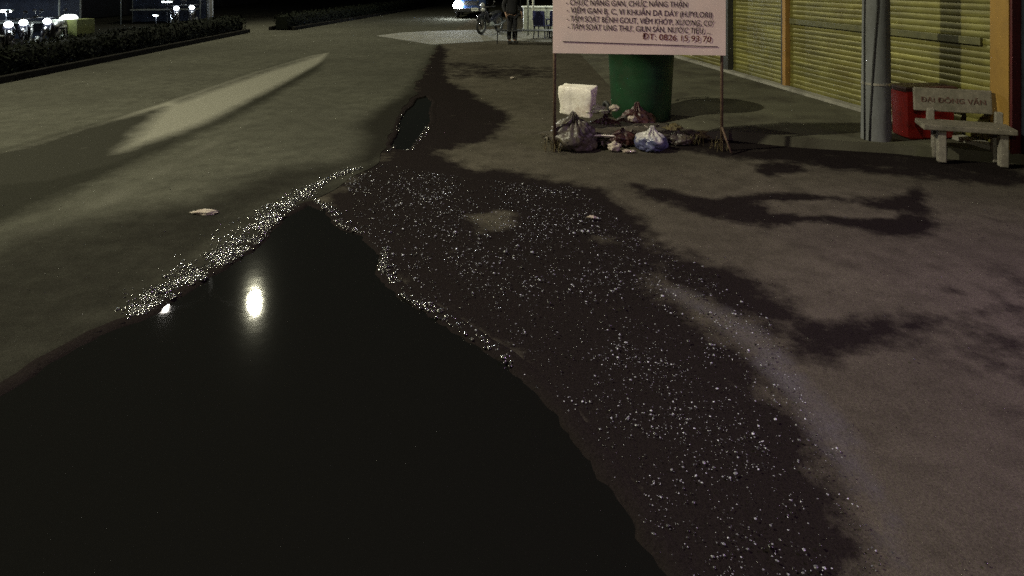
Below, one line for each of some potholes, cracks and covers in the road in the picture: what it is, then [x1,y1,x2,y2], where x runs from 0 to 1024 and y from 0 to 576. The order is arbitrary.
pothole [385,95,437,152]
